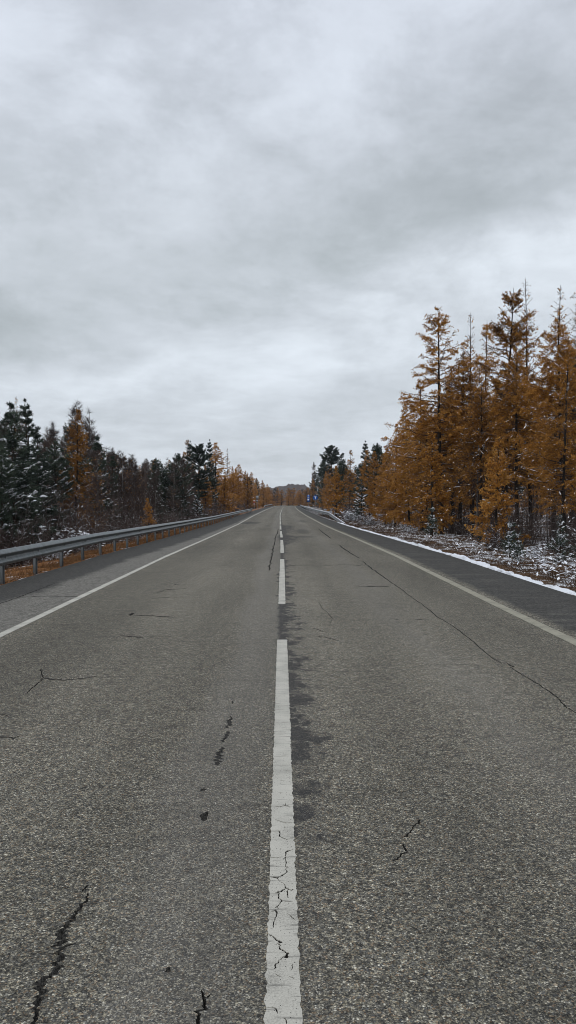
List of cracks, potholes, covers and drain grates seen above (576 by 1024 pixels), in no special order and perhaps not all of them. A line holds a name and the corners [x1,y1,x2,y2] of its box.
crack [267,804,293,1024]
crack [30,885,89,1024]
crack [268,530,576,713]
crack [194,990,210,1024]
crack [27,669,96,693]
crack [213,701,234,766]
crack [393,819,421,861]
